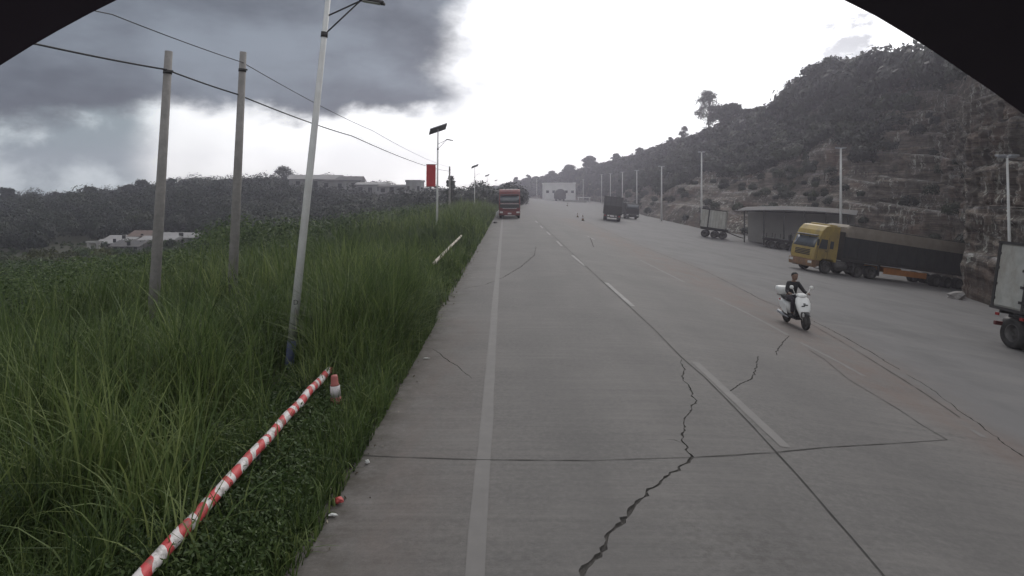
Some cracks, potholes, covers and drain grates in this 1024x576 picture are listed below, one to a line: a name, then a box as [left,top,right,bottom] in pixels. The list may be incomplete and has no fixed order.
crack [730,336,789,391]
crack [579,359,697,576]
